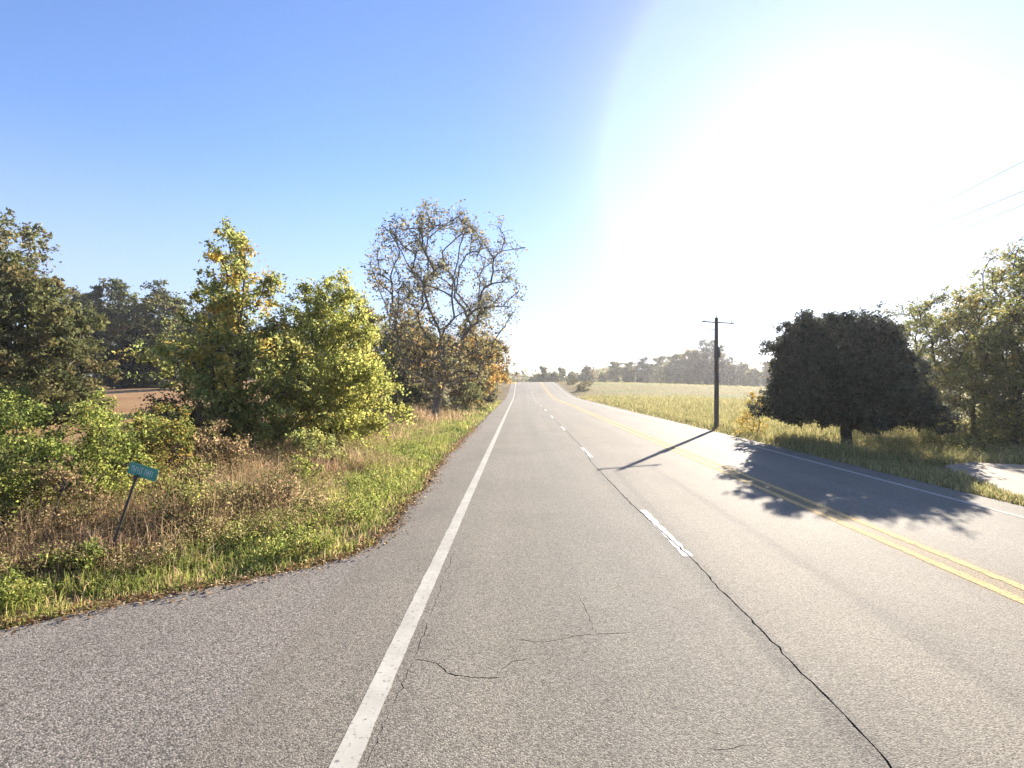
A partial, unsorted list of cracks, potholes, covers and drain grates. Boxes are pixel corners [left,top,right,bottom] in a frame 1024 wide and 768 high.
crack [365,556,526,768]
crack [517,599,634,642]
crack [567,432,892,768]
